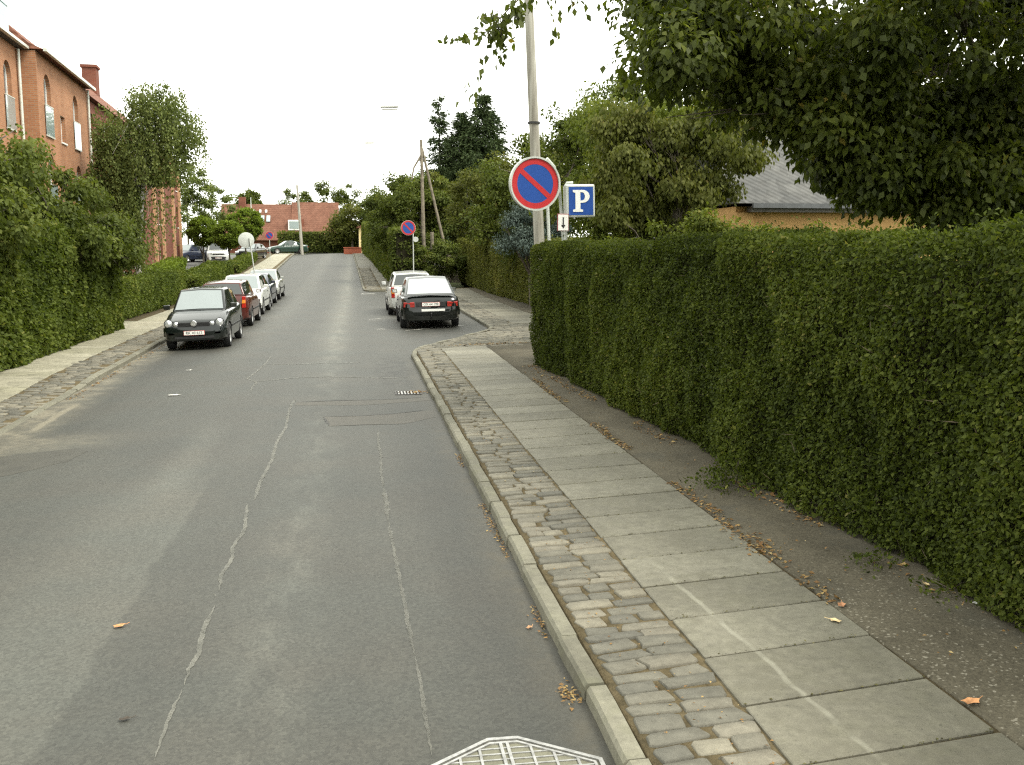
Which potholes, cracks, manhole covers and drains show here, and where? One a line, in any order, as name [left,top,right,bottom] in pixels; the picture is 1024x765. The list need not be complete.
crack [154,356,432,760]
